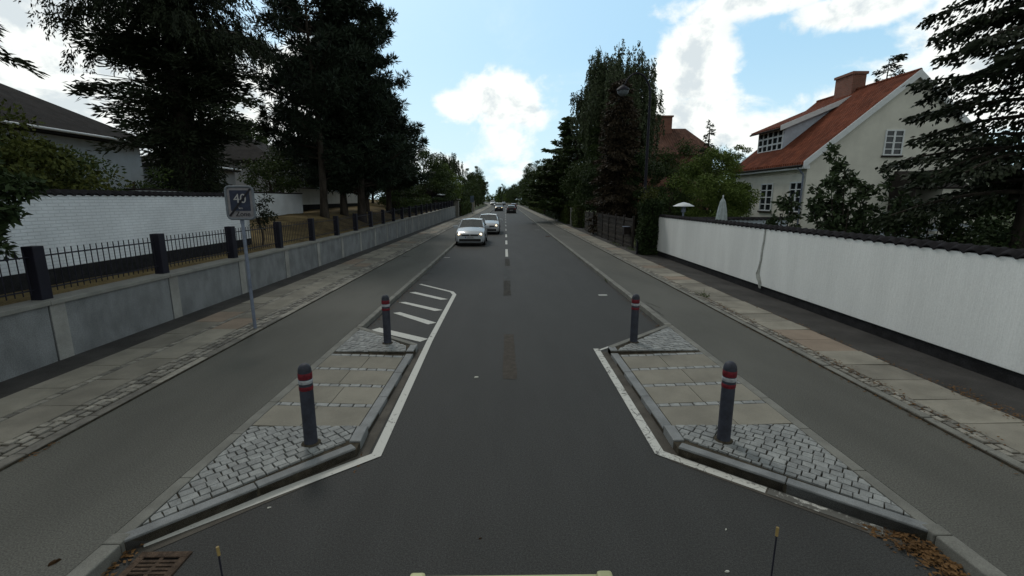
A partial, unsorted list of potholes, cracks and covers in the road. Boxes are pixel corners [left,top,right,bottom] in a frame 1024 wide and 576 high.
drain grate [118,551,193,576]
